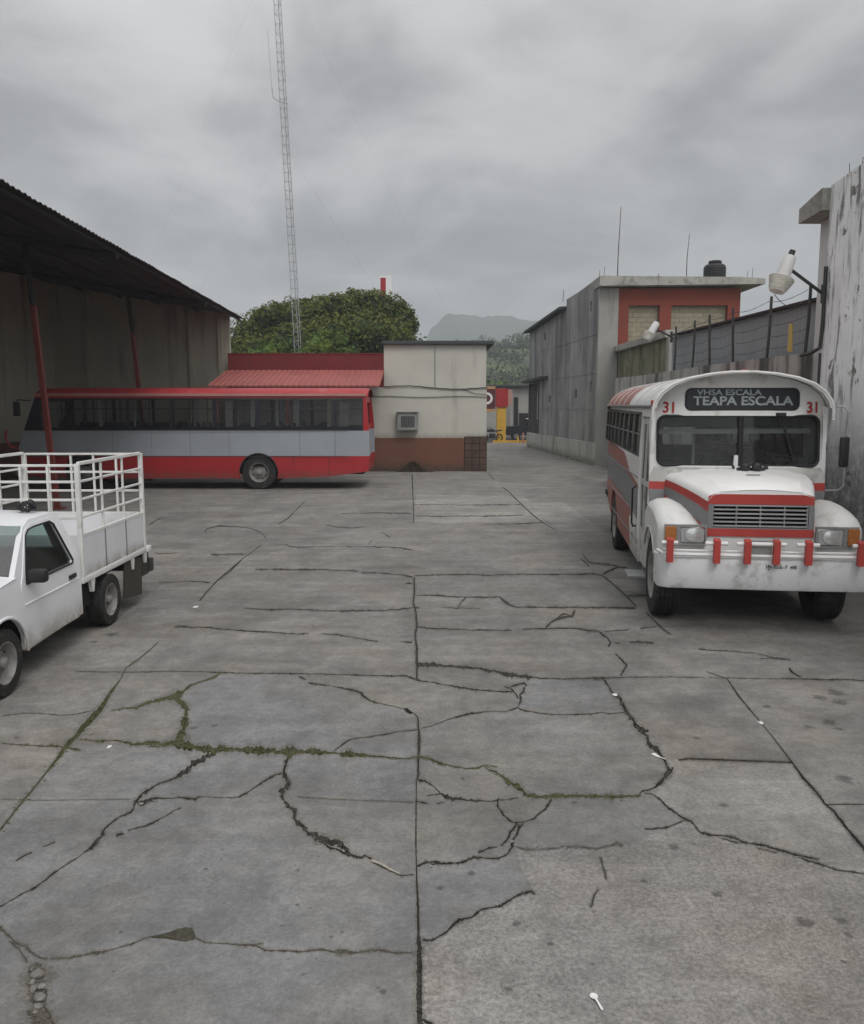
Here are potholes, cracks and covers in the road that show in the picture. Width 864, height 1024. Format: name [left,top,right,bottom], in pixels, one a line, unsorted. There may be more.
crack [0,552,864,955]
crack [205,504,542,550]
